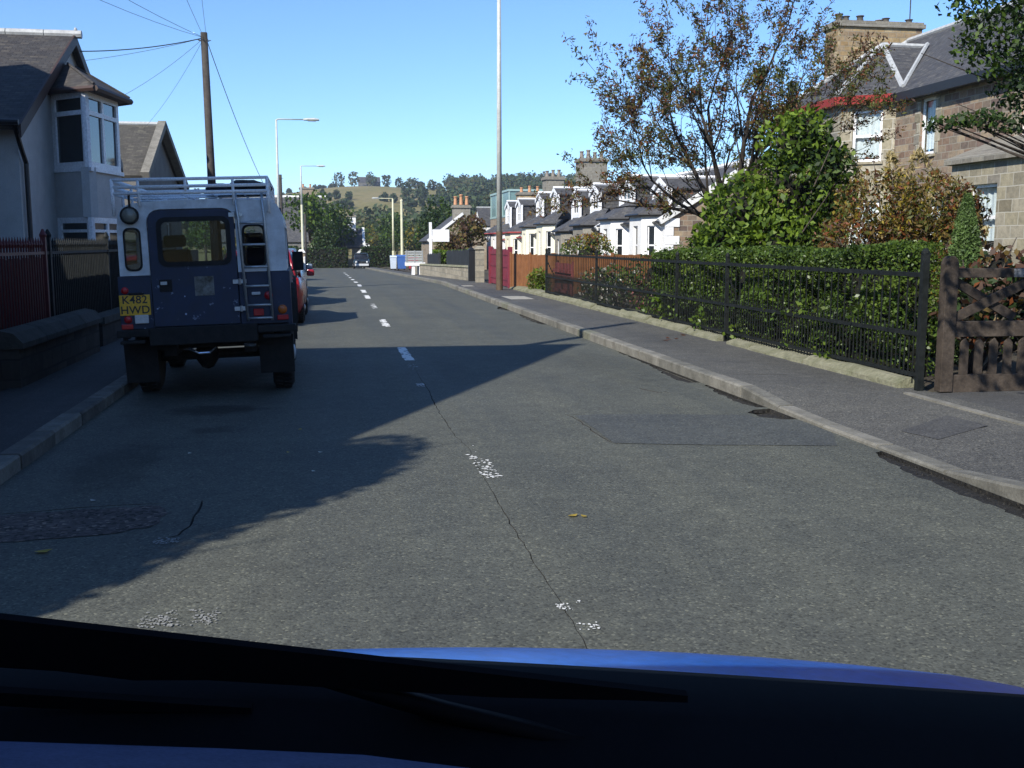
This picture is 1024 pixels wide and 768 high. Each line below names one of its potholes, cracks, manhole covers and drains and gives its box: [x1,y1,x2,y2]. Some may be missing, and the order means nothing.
pothole [748,409,796,419]
crack [164,501,203,539]
pothole [876,451,1024,519]
crack [424,383,587,649]
